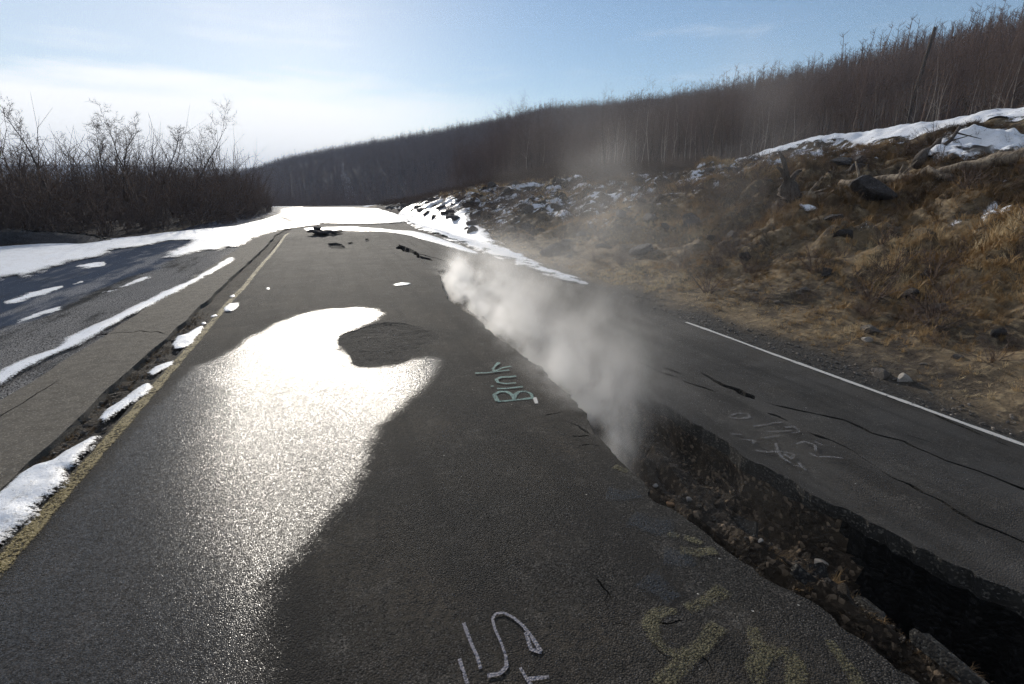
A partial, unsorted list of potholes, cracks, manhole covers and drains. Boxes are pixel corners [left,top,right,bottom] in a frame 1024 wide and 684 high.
crack [396,245,1024,684]
